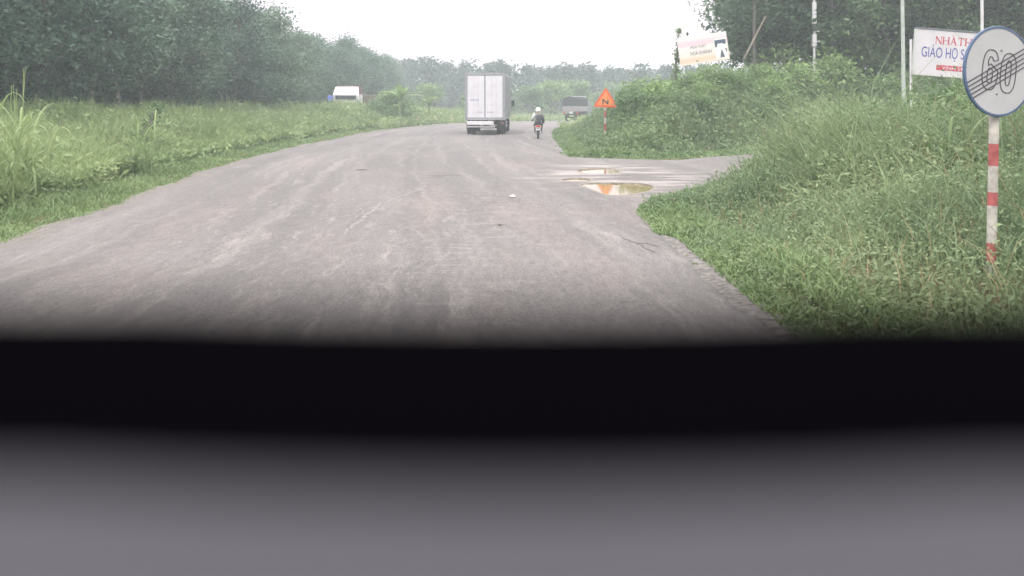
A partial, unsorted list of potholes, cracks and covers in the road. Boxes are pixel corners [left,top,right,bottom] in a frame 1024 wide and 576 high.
pothole [575,182,660,196]
crack [345,175,450,232]
